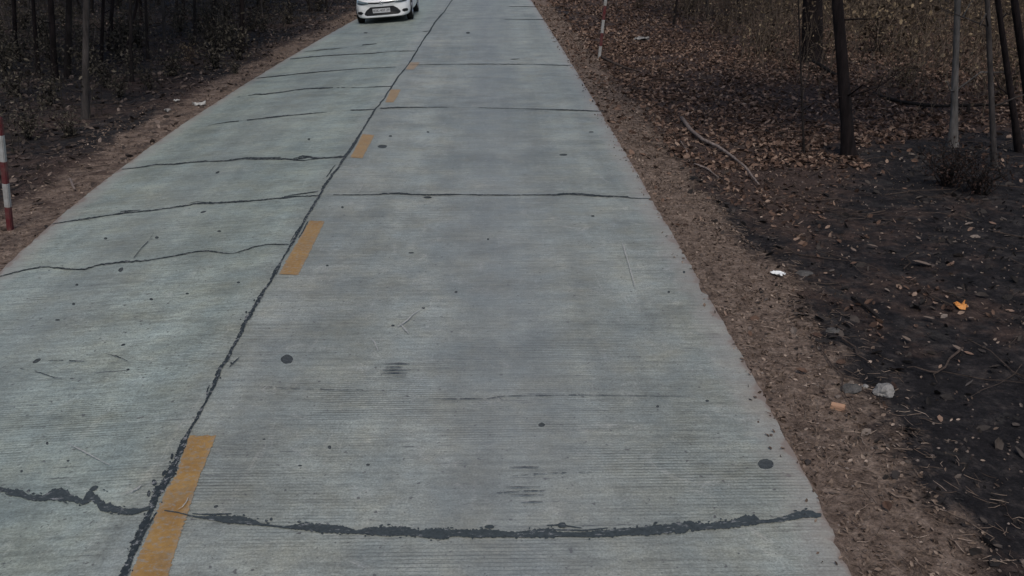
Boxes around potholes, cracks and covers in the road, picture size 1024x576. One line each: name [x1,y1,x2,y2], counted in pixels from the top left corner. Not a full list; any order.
crack [212,109,374,125]
crack [1,237,289,276]
